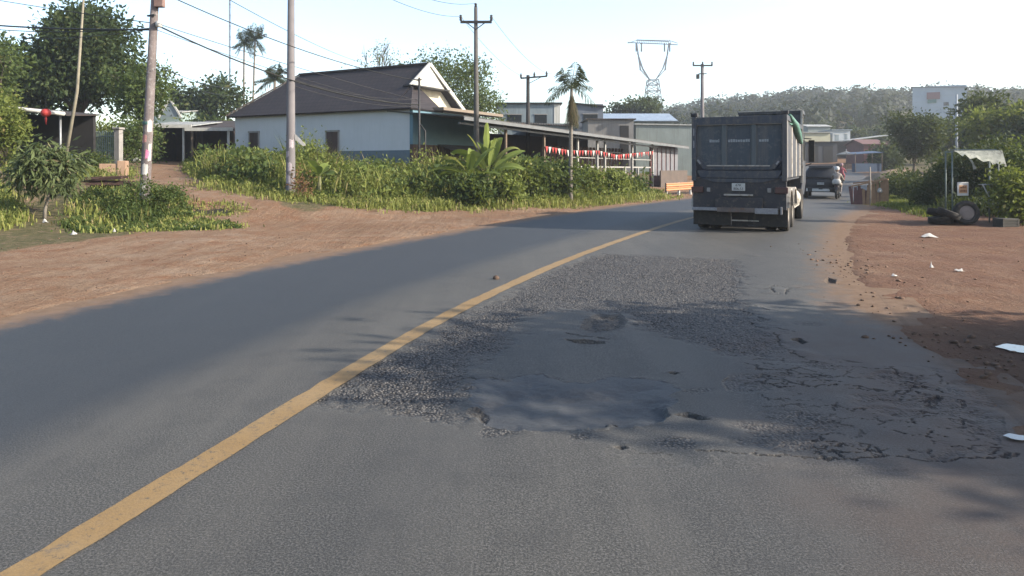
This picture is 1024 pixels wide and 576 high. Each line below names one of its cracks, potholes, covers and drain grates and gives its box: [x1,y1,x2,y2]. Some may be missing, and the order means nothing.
crack [696,285,1020,463]
pothole [675,412,710,421]
pothole [580,314,628,333]
